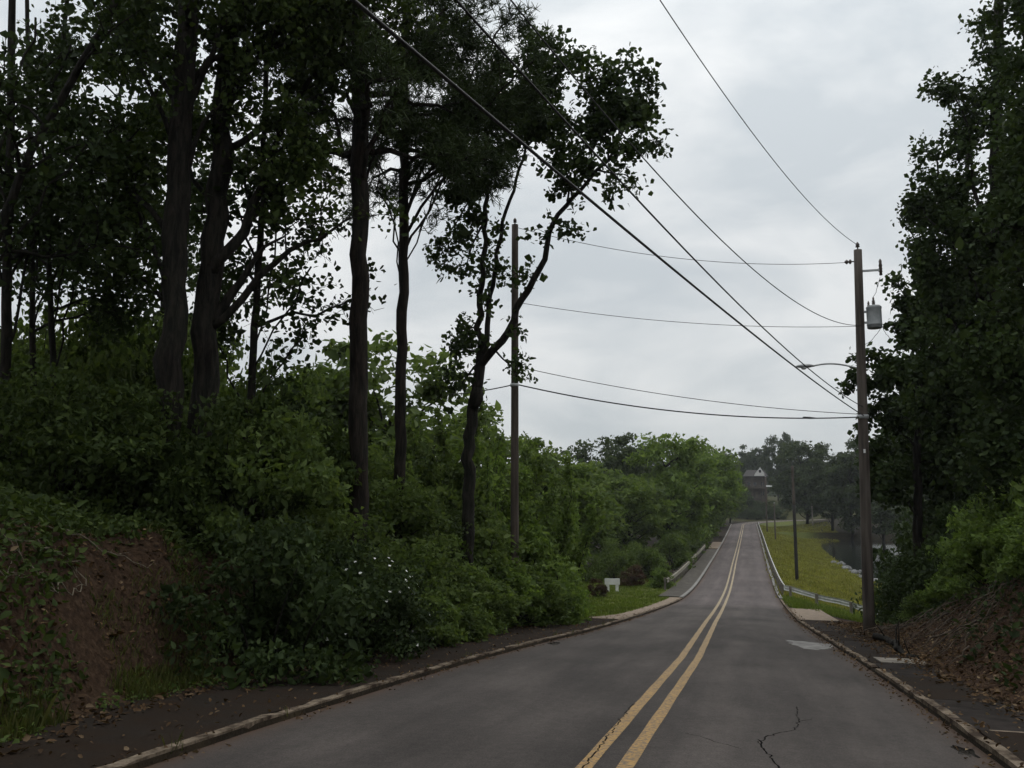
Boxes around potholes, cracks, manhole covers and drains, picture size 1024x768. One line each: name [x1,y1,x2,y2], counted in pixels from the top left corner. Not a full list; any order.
crack [757,707,811,768]
